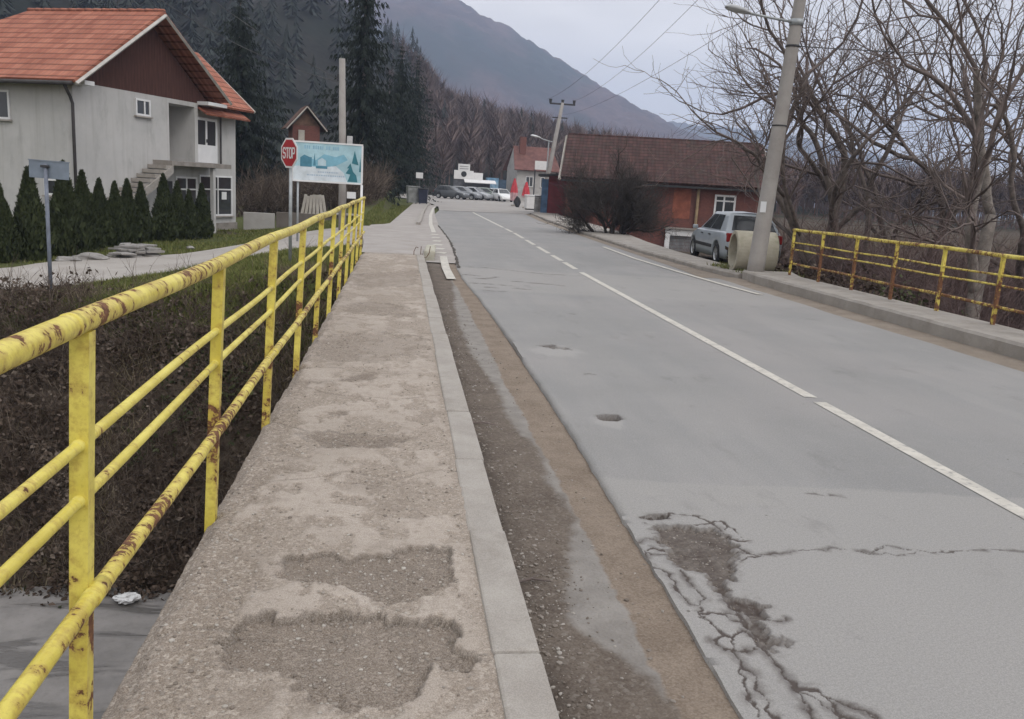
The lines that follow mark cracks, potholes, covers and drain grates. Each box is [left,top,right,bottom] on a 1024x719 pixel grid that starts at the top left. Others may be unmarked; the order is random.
pothole [200,602,495,719]
crack [622,506,1024,719]
pothole [261,540,470,611]
